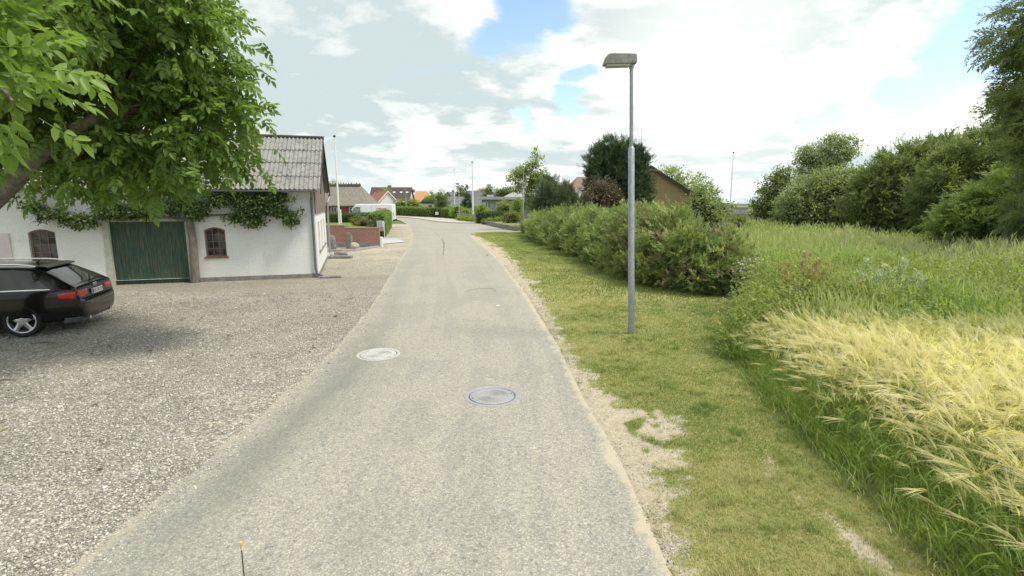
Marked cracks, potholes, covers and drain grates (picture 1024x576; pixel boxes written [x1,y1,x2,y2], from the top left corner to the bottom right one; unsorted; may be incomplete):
manhole cover [356,348,400,361]
manhole cover [464,386,520,407]
